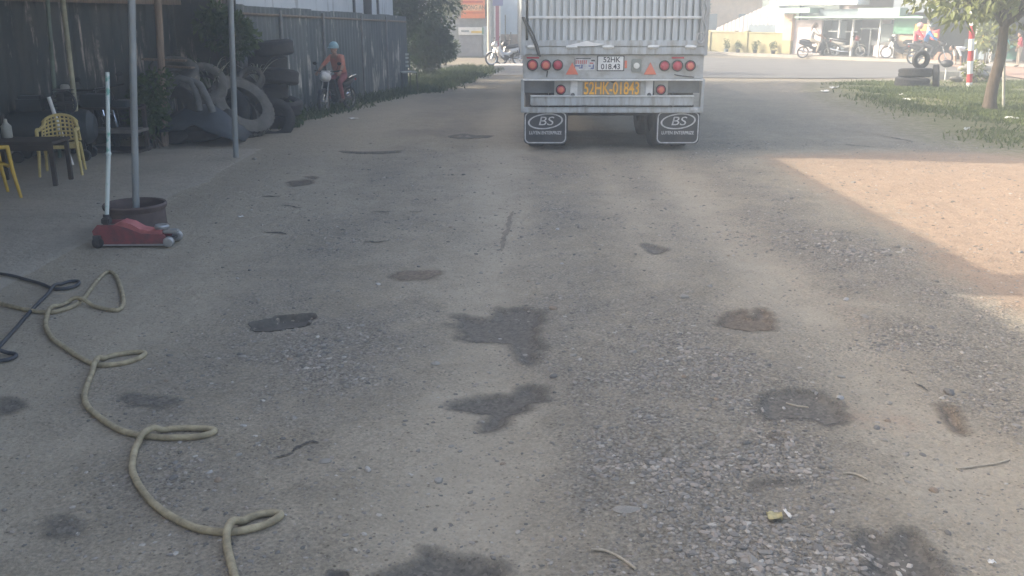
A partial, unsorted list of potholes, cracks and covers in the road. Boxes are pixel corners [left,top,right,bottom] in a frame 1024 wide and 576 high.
crack [273,440,318,458]
pothole [717,309,774,332]
pothole [759,388,848,425]
pothole [939,405,965,434]
